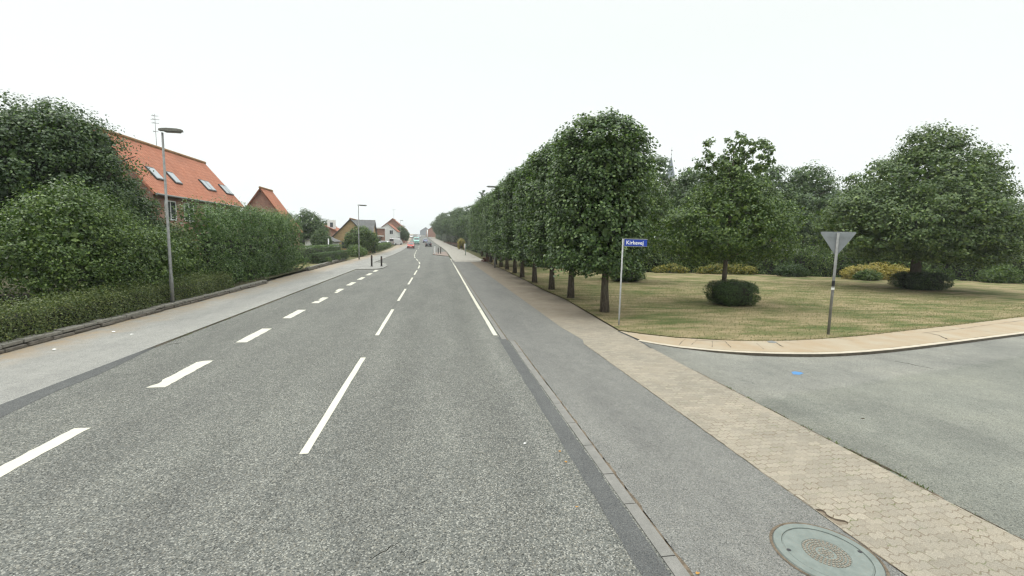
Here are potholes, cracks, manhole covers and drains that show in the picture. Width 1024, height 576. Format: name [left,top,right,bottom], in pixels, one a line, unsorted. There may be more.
manhole cover [769,522,890,576]
